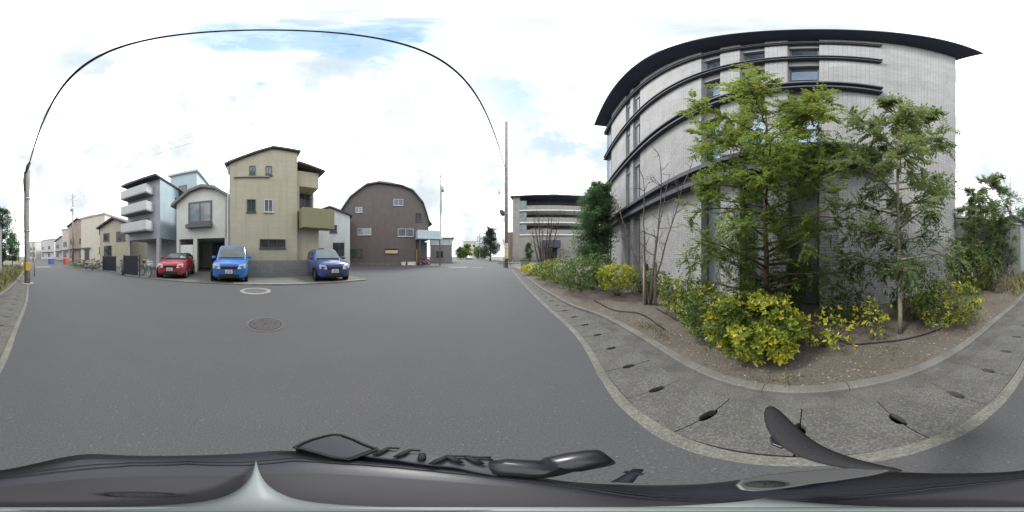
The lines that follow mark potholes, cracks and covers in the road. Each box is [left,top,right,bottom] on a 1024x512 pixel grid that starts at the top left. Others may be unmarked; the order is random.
manhole cover [245,317,285,332]
